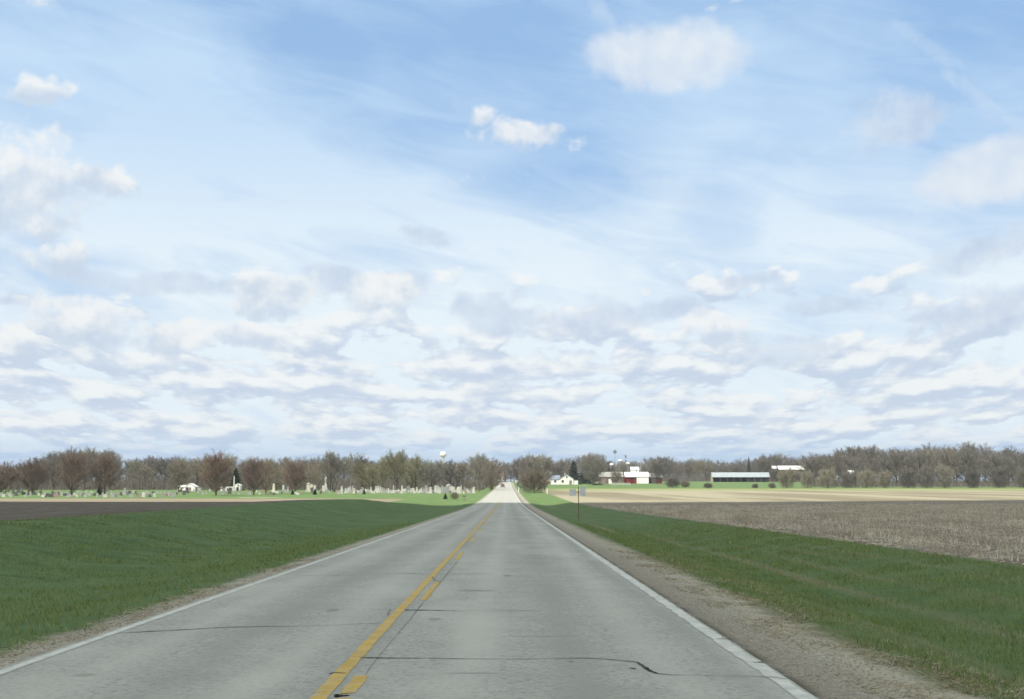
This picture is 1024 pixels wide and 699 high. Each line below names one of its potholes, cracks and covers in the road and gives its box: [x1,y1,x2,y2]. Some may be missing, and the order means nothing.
crack [363,657,787,679]
